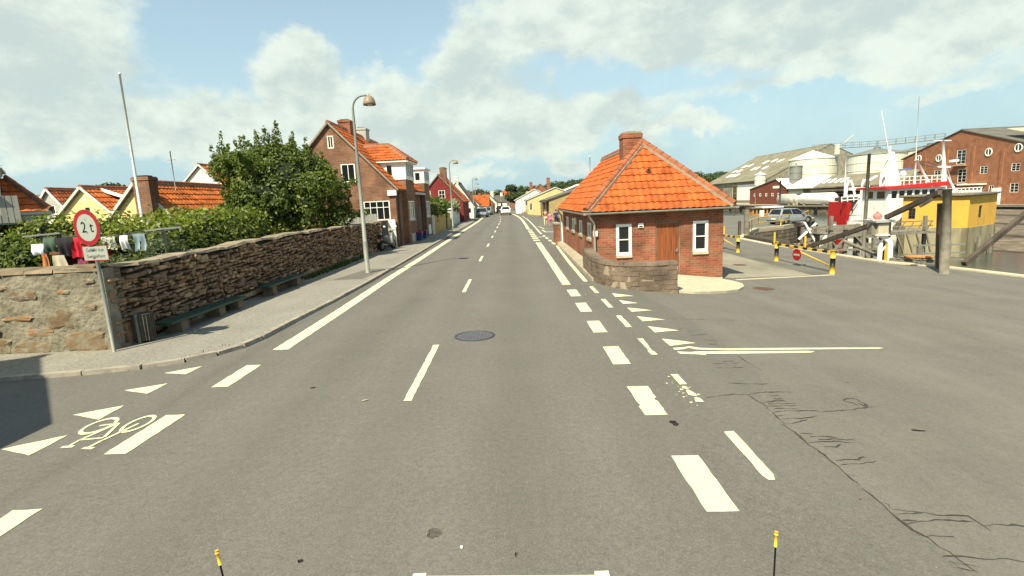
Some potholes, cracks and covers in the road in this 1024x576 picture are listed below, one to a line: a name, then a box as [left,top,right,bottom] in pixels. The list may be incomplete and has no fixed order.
manhole cover [454,331,495,341]
crack [862,488,1024,573]
crack [669,318,874,424]
